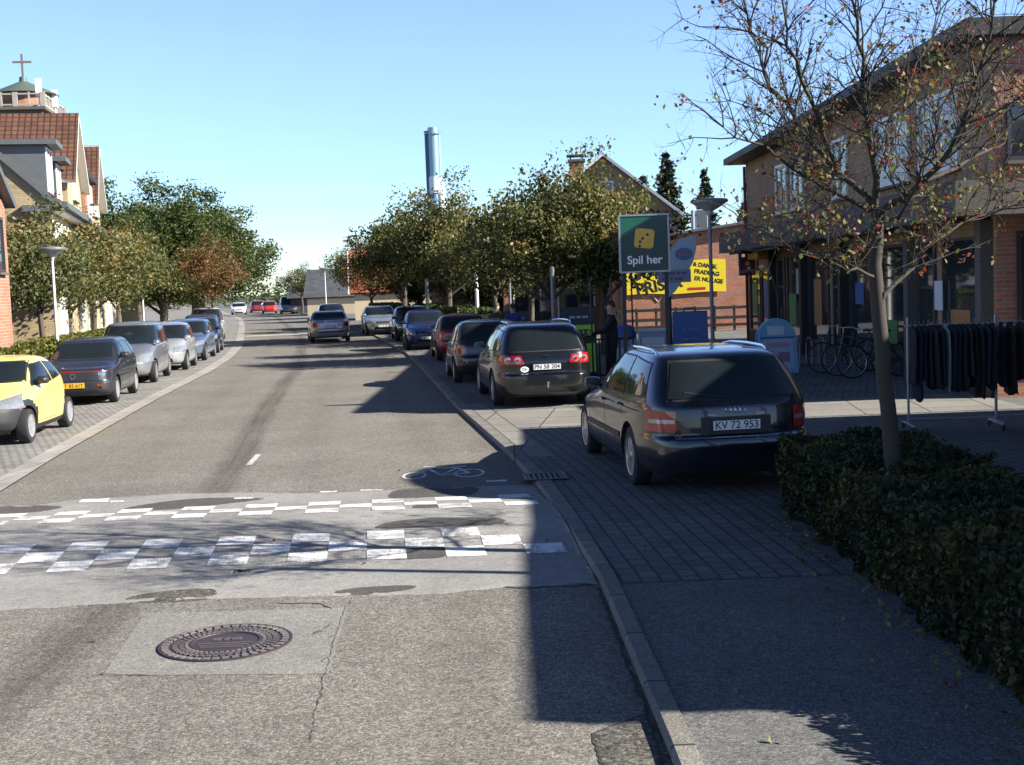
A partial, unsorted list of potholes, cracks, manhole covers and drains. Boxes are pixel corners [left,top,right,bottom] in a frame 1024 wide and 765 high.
drain grate [521,472,569,482]
manhole cover [158,624,293,662]
crack [277,598,352,744]
